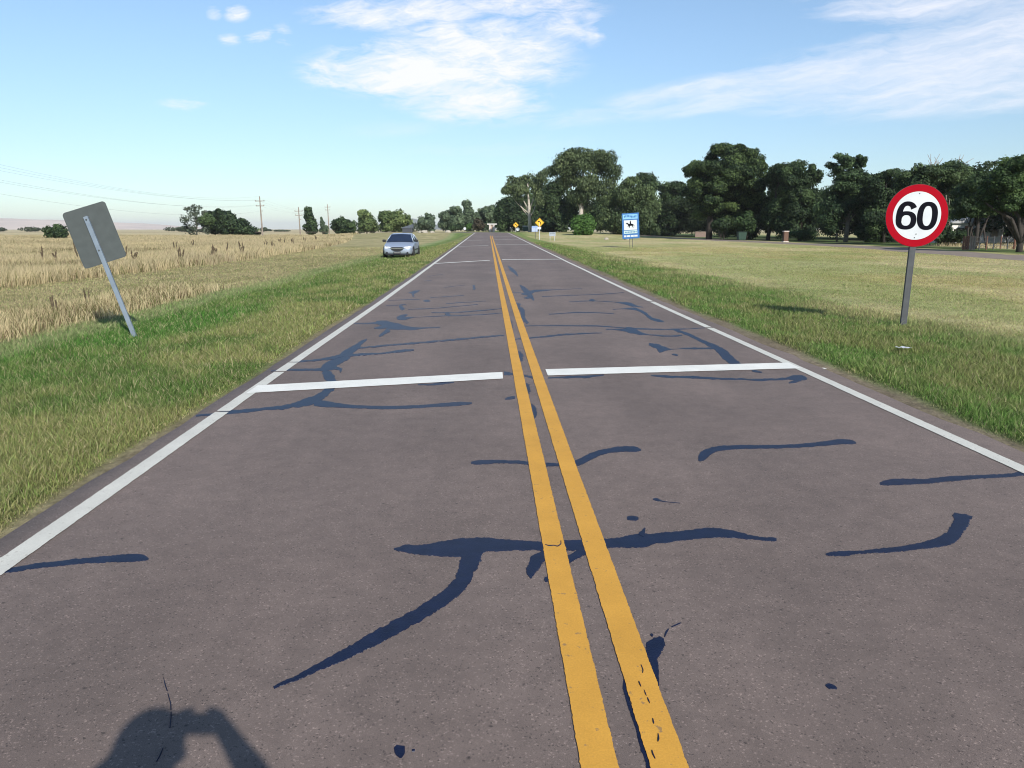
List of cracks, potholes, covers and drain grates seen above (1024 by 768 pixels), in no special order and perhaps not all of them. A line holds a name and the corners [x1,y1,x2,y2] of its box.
crack [156,677,172,762]
